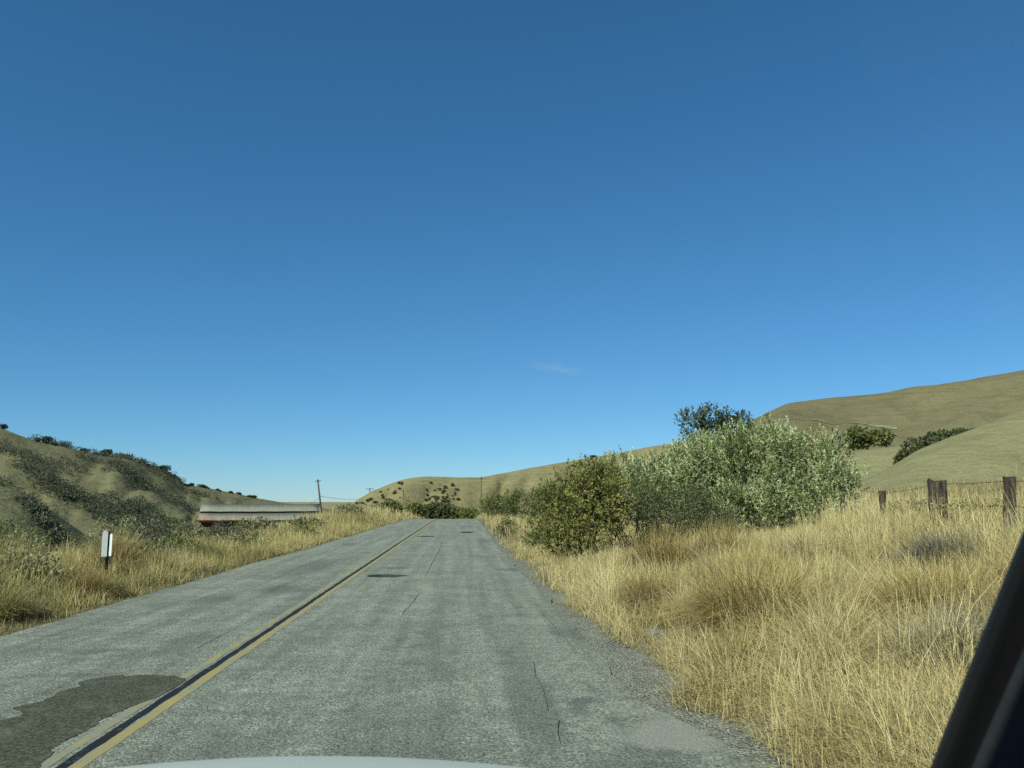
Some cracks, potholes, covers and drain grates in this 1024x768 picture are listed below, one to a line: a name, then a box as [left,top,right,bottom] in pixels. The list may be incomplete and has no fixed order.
crack [533,659,561,744]
